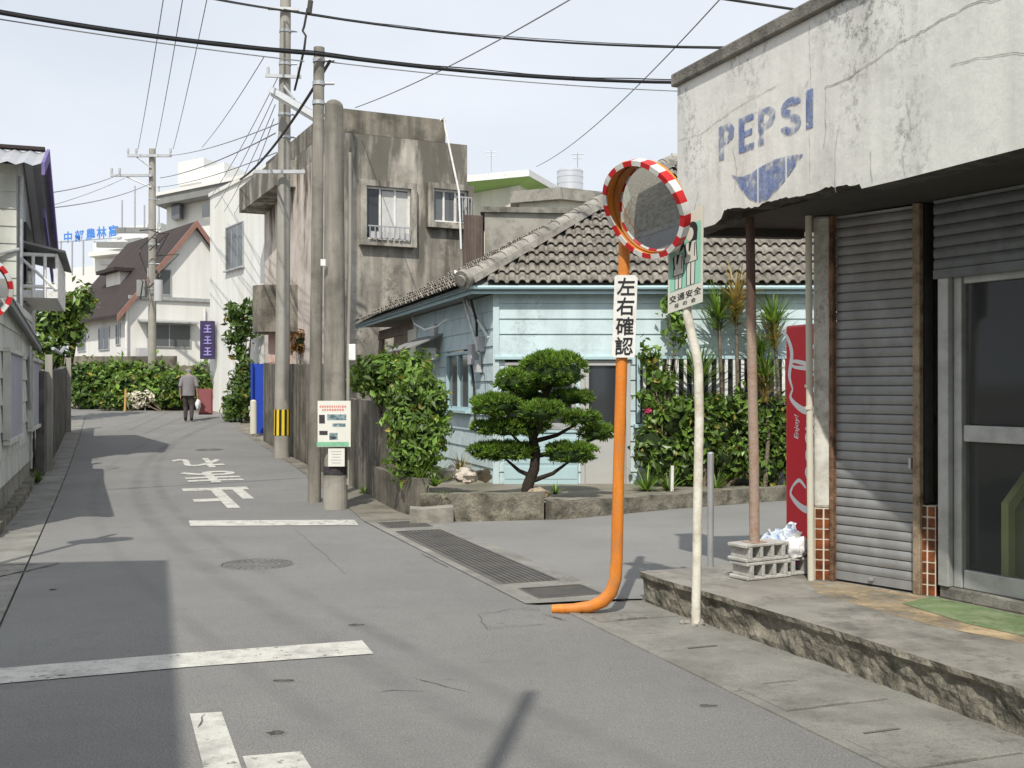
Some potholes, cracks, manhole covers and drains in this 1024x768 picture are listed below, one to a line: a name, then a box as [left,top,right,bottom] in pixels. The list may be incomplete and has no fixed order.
manhole cover [219,558,294,570]
drain grate [518,584,601,599]
drain grate [394,529,559,584]
